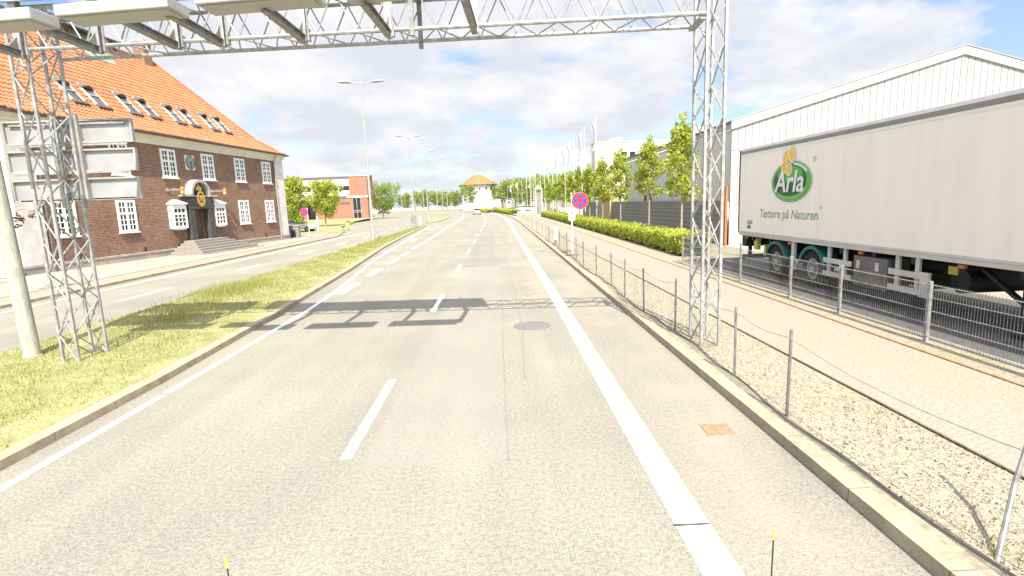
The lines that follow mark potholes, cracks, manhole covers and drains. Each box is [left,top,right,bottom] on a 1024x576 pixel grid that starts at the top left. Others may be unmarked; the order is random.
manhole cover [513,321,550,330]
